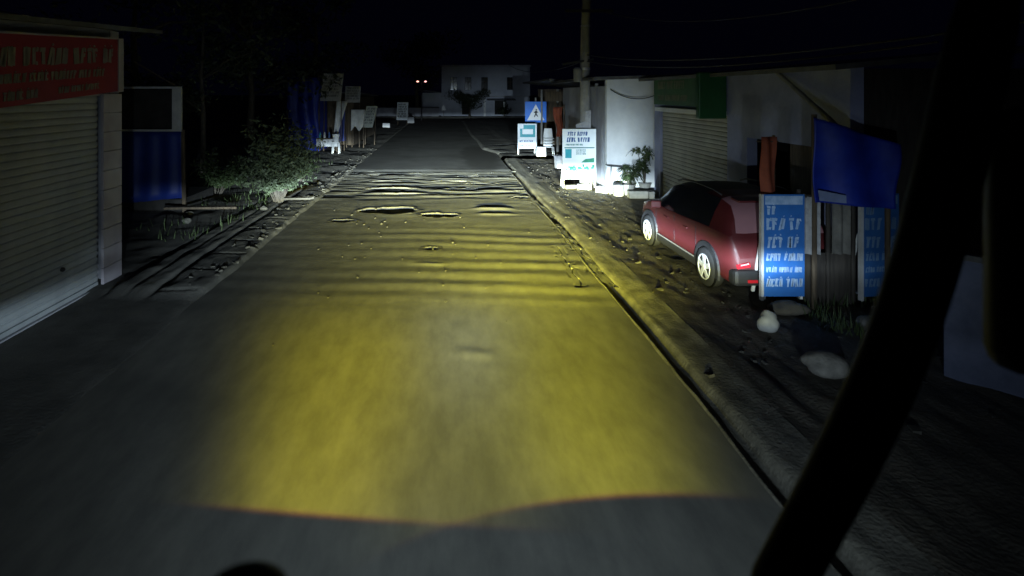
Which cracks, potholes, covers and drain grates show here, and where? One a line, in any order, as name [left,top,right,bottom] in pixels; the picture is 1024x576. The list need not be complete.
pothole [353,206,425,215]
